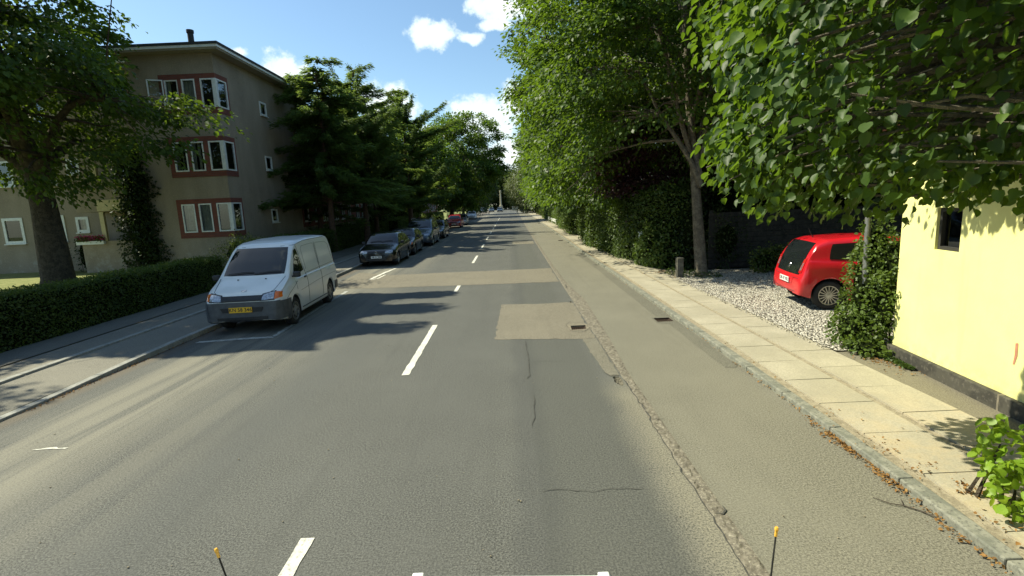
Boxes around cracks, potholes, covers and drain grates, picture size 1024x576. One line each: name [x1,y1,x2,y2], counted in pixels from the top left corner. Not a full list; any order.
crack [525,341,538,423]
